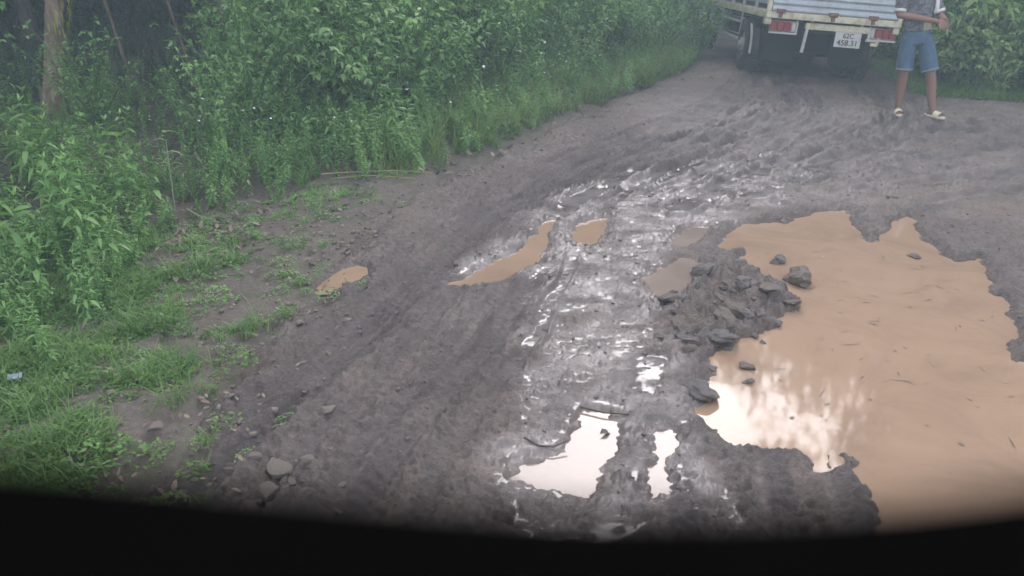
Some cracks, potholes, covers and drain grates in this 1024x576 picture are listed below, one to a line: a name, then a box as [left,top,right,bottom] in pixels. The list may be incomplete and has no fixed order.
pothole [489,394,655,509]
pothole [677,201,1024,504]
pothole [315,258,382,300]
pothole [418,210,569,290]
pothole [624,410,701,508]
pothole [562,209,620,246]
pothole [655,217,722,250]
